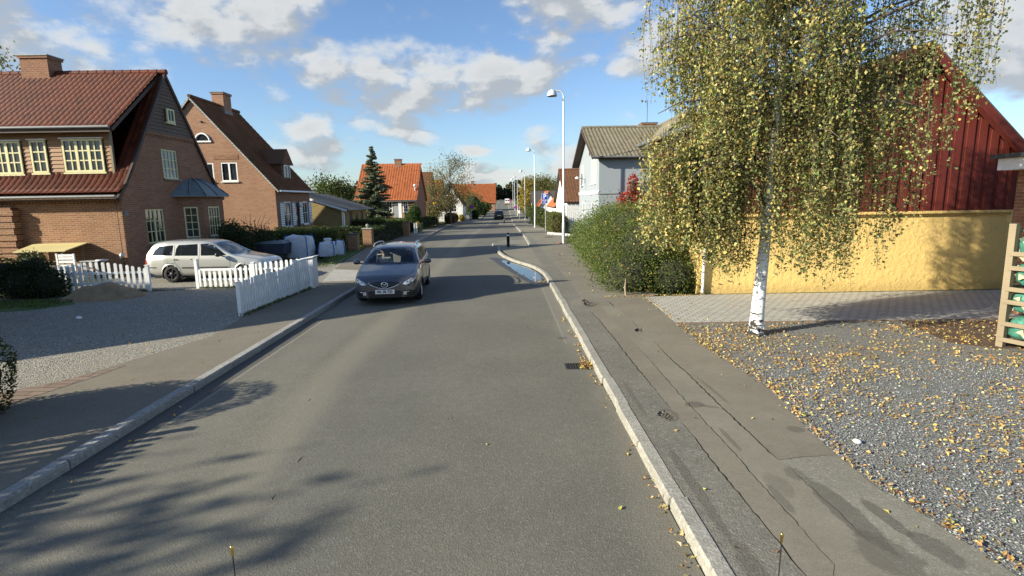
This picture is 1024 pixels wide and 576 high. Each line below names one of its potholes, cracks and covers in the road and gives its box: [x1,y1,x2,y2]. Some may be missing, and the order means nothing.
pothole [657,410,676,420]
